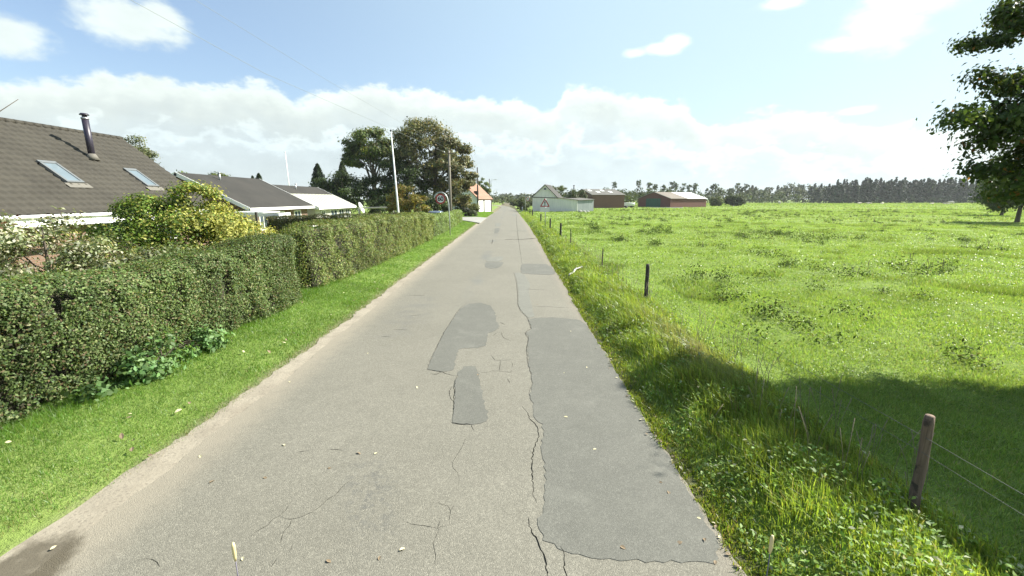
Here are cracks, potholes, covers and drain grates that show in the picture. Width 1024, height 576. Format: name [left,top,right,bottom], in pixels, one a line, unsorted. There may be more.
crack [484,279,567,576]
